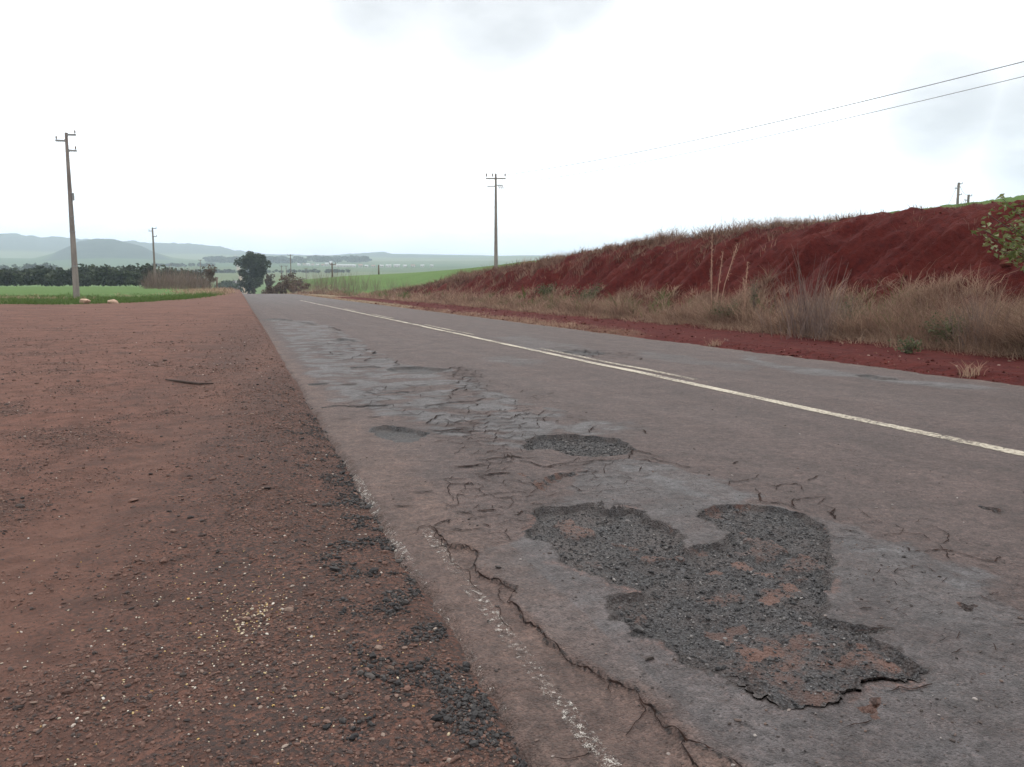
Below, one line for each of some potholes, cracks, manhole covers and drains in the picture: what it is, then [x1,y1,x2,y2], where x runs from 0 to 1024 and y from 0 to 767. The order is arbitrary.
crack [309,327,399,366]
pothole [521,433,637,457]
crack [343,366,1024,767]
pothole [523,500,929,710]
pothole [368,425,430,443]
